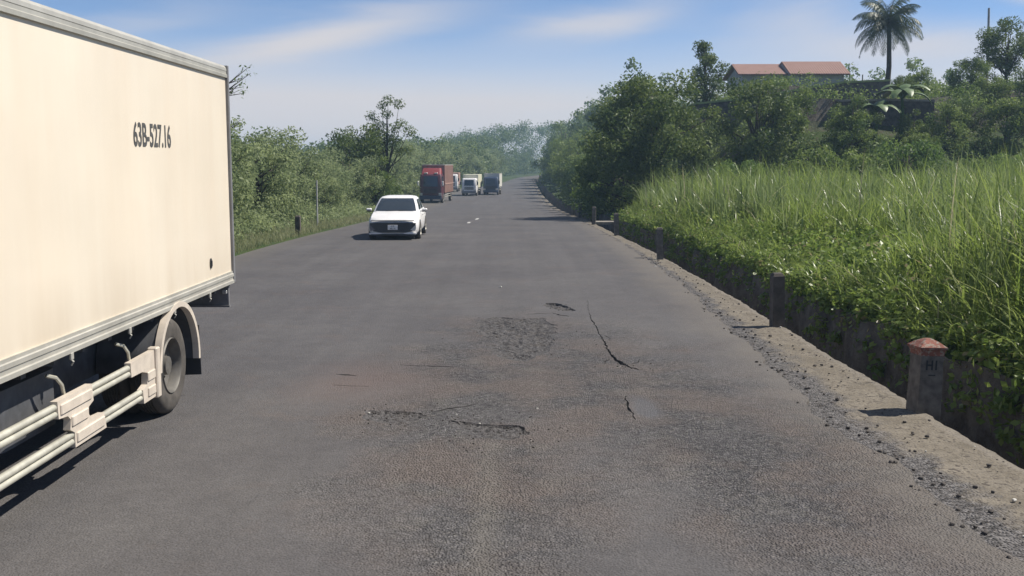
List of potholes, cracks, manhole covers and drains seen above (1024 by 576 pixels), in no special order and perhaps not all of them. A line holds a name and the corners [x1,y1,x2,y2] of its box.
pothole [450,420,530,440]
pothole [542,303,576,311]
crack [587,300,640,370]
